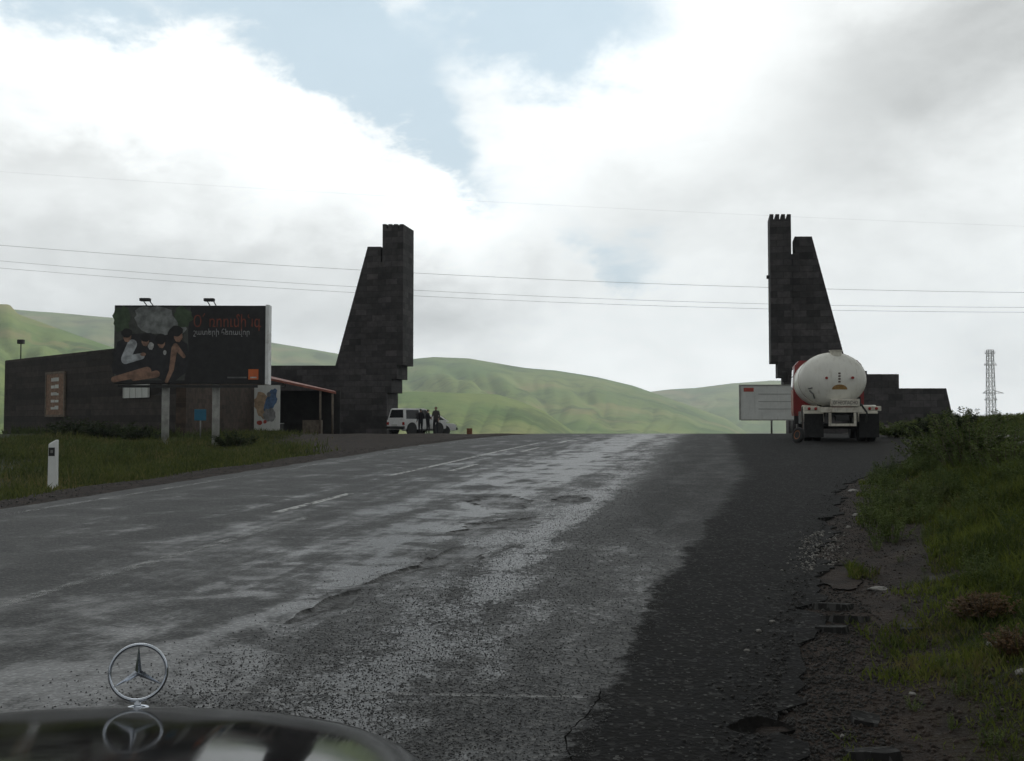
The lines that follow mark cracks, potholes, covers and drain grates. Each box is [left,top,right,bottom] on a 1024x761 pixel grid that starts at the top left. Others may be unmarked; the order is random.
pothole [551,496,592,505]
pothole [466,495,534,510]
pothole [727,716,795,735]
